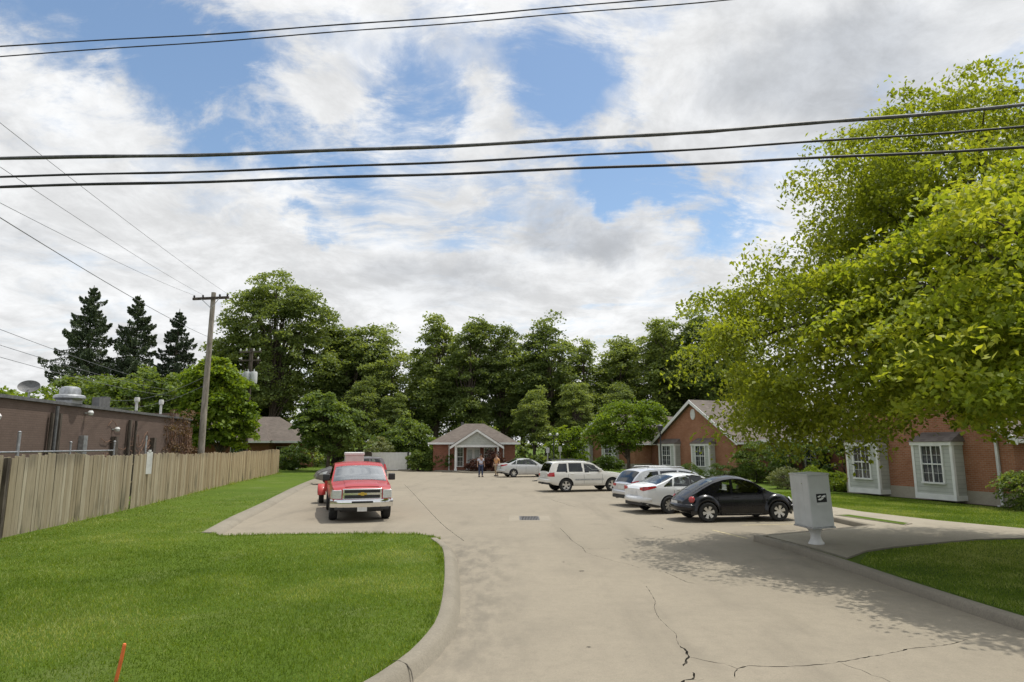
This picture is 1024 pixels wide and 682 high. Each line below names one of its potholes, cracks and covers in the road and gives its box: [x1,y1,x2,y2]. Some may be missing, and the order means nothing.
crack [646,586,968,682]
